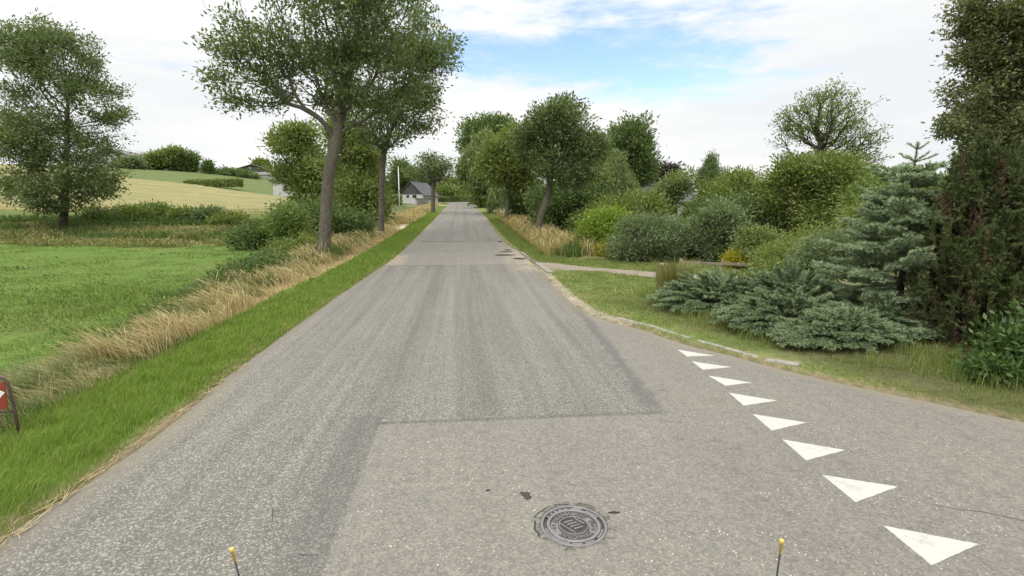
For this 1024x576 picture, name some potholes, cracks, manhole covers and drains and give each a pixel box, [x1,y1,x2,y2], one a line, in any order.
crack [932,504,1024,521]
manhole cover [540,505,608,546]
